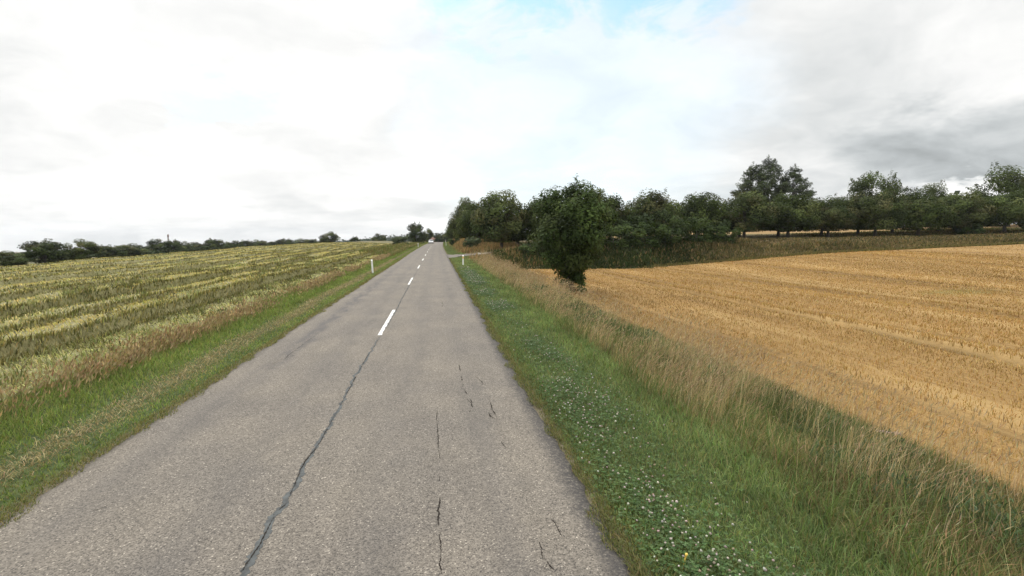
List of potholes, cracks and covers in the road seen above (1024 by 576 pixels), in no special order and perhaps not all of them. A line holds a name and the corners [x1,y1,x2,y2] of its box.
crack [437,498,445,574]
